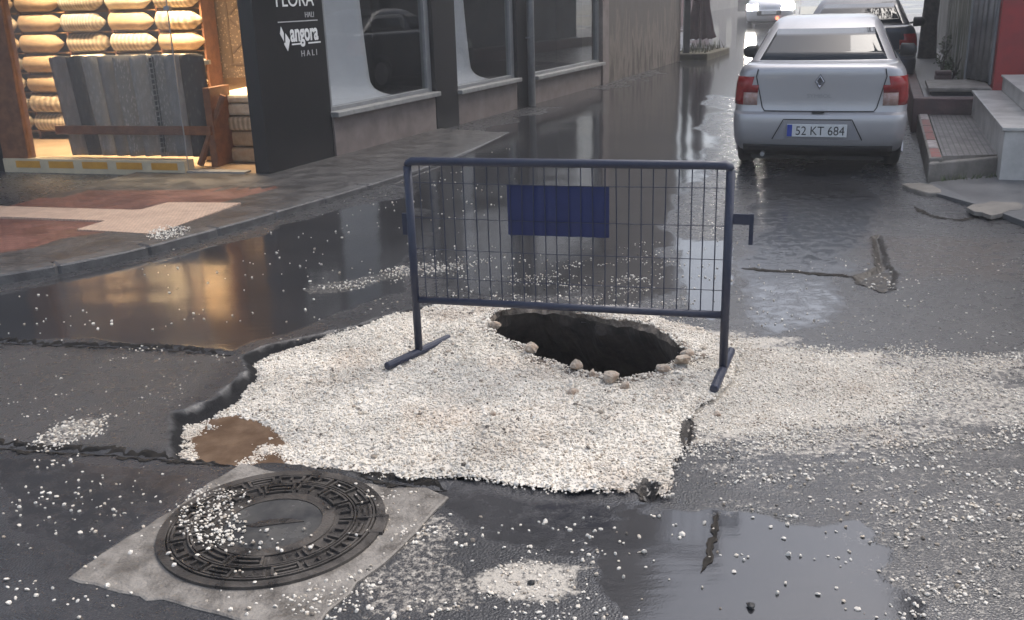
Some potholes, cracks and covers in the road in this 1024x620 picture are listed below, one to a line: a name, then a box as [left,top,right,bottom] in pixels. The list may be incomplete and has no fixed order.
manhole cover [68,464,449,620]
pothole [480,308,708,383]
crack [913,206,979,221]
